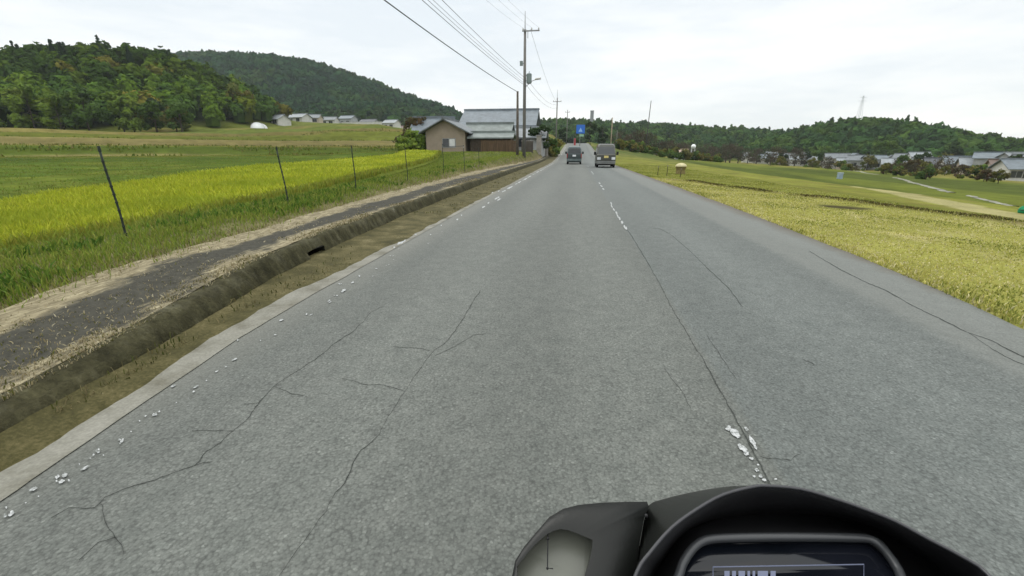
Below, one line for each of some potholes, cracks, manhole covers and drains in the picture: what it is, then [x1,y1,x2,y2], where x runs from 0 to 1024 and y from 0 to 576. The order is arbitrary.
crack [810,251,1024,364]
crack [629,232,800,484]
crack [51,307,380,560]
crack [279,291,480,576]
